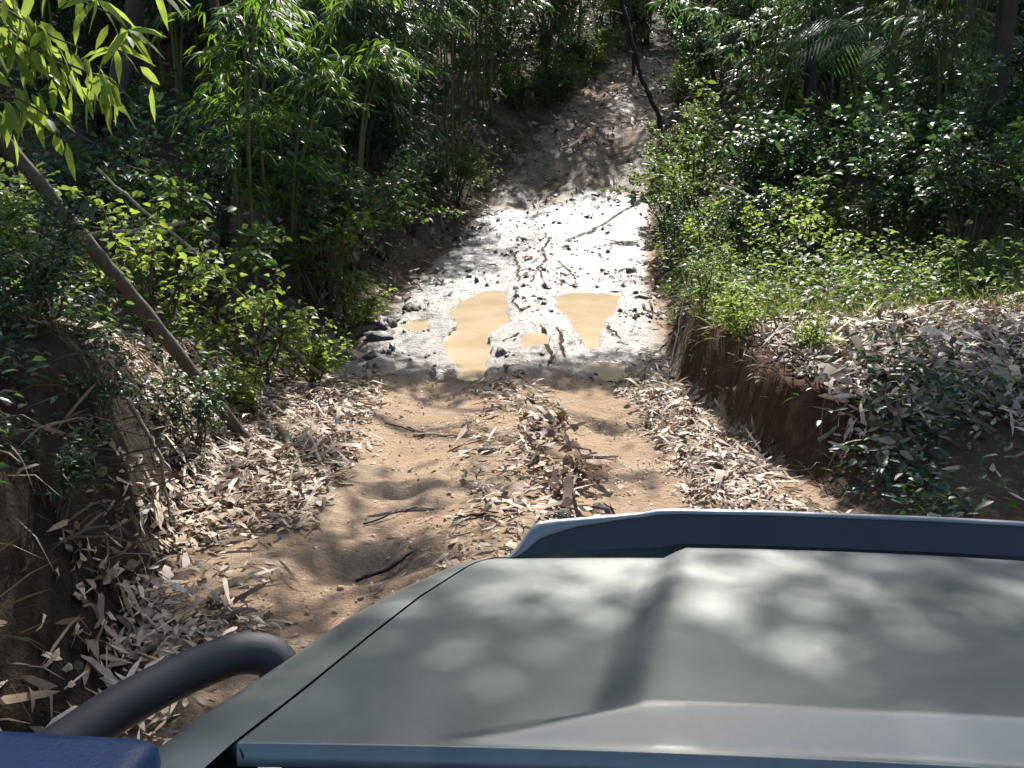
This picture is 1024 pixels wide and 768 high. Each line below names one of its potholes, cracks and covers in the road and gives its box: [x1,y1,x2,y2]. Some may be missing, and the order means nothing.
pothole [513,326,556,348]
pothole [550,289,627,350]
pothole [435,285,515,381]
pothole [577,359,636,381]
pothole [398,317,433,333]
